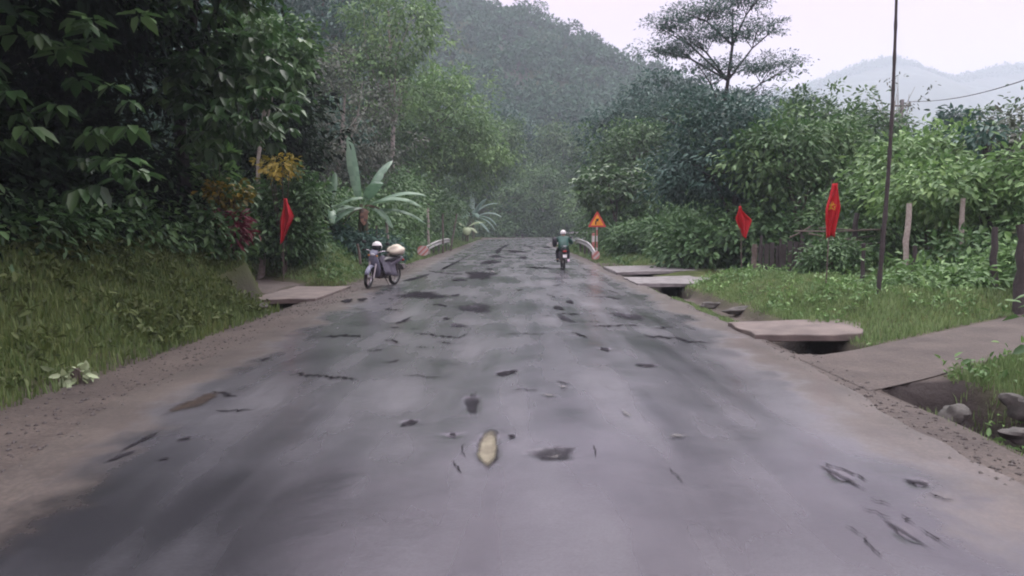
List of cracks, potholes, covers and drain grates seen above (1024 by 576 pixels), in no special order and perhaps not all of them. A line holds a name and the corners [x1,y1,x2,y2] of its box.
crack [847,497,947,556]
pothole [170,393,216,411]
pothole [535,448,572,459]
pothole [461,304,488,312]
pothole [477,430,497,465]
crack [321,327,465,377]
pothole [466,395,478,412]
